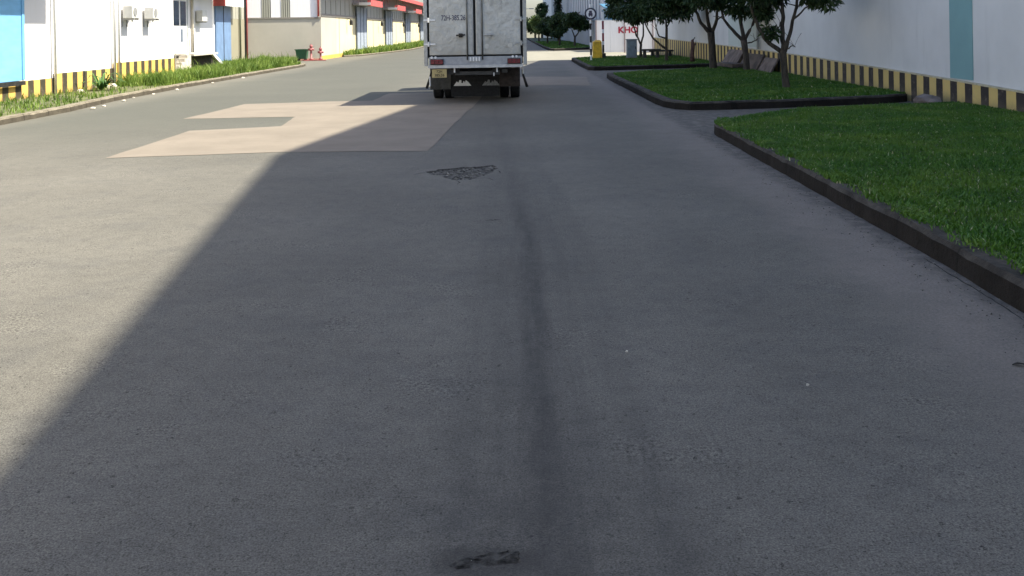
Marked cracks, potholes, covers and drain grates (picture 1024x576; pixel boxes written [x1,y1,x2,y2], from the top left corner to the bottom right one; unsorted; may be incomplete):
pothole [418,165,501,185]
pothole [449,550,521,570]
